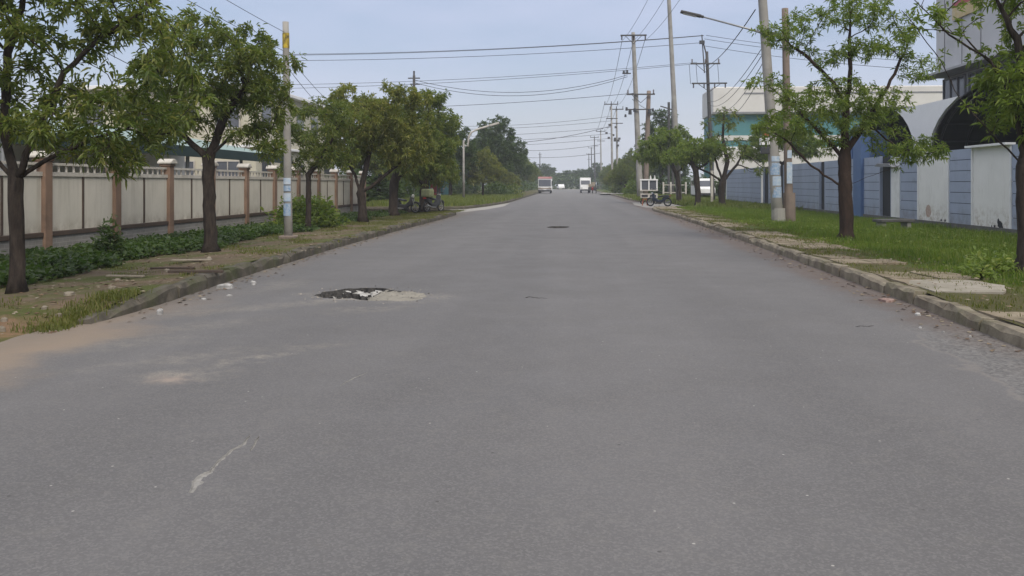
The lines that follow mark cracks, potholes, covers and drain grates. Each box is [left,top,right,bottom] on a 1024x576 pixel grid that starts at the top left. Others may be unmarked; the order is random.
crack [189,435,259,493]
pothole [292,285,442,304]
